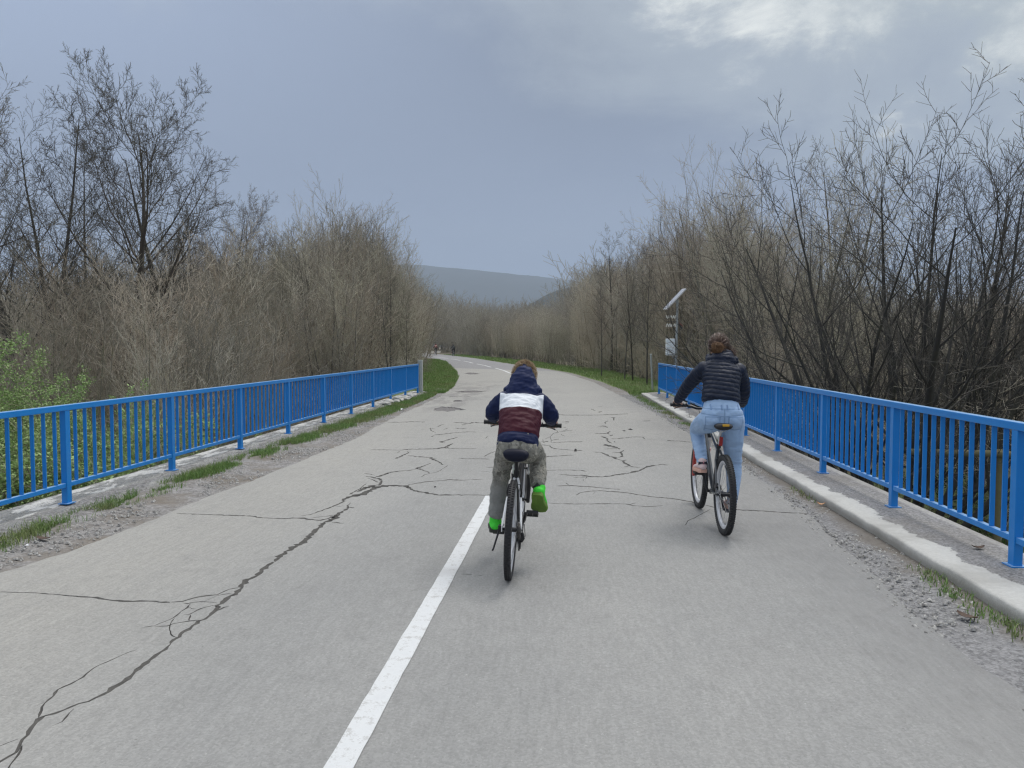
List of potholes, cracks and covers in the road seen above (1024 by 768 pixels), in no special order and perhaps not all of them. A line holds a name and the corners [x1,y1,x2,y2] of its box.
crack [545,406,791,525]
crack [0,422,495,768]
